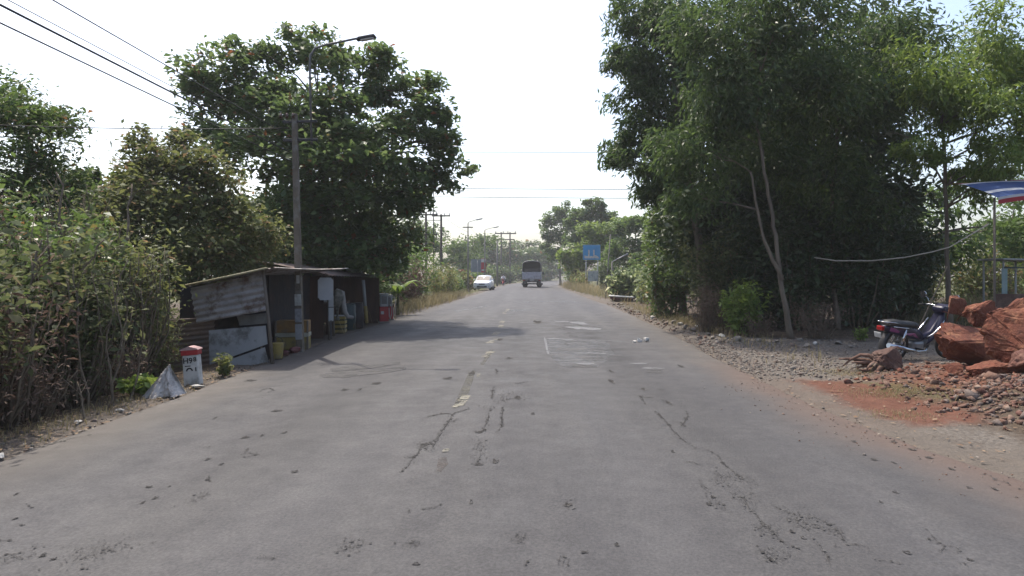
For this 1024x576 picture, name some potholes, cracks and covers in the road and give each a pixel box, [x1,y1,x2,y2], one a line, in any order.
crack [399,369,537,472]
crack [639,389,966,566]
